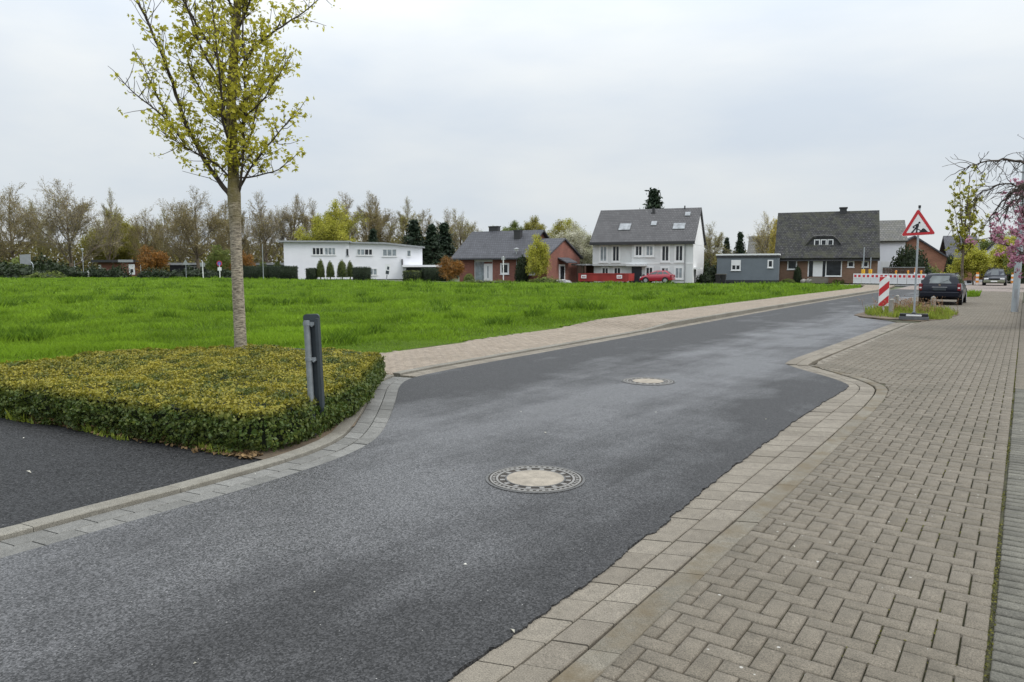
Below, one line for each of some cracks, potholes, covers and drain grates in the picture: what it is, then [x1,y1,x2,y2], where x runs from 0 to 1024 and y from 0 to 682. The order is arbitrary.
manhole cover [486,465,585,494]
manhole cover [621,377,675,385]
